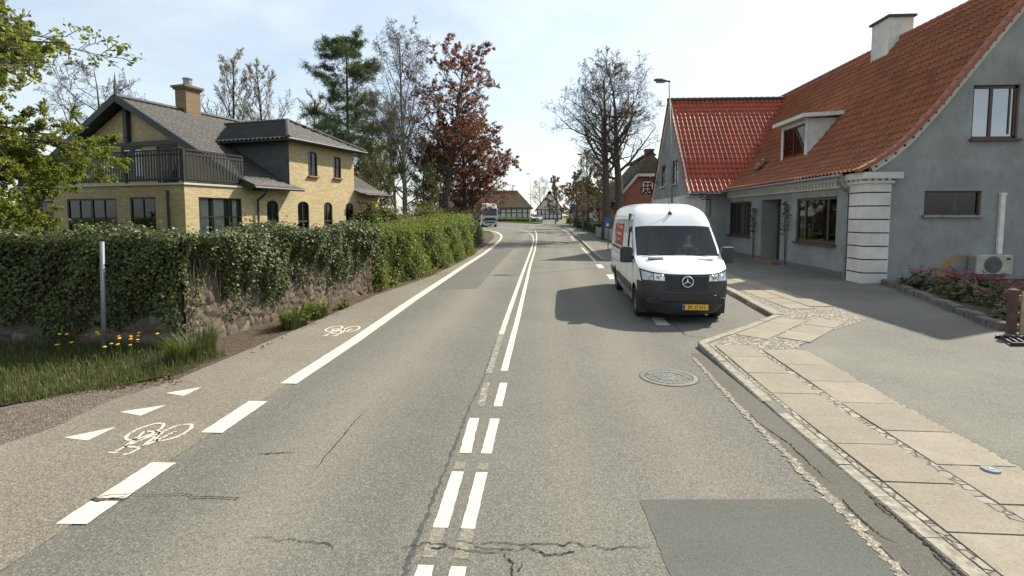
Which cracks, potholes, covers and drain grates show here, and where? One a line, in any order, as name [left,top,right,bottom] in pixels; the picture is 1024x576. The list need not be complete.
crack [403,540,653,576]
manhole cover [639,368,699,387]
drain grate [995,335,1024,346]
crack [91,493,239,502]
